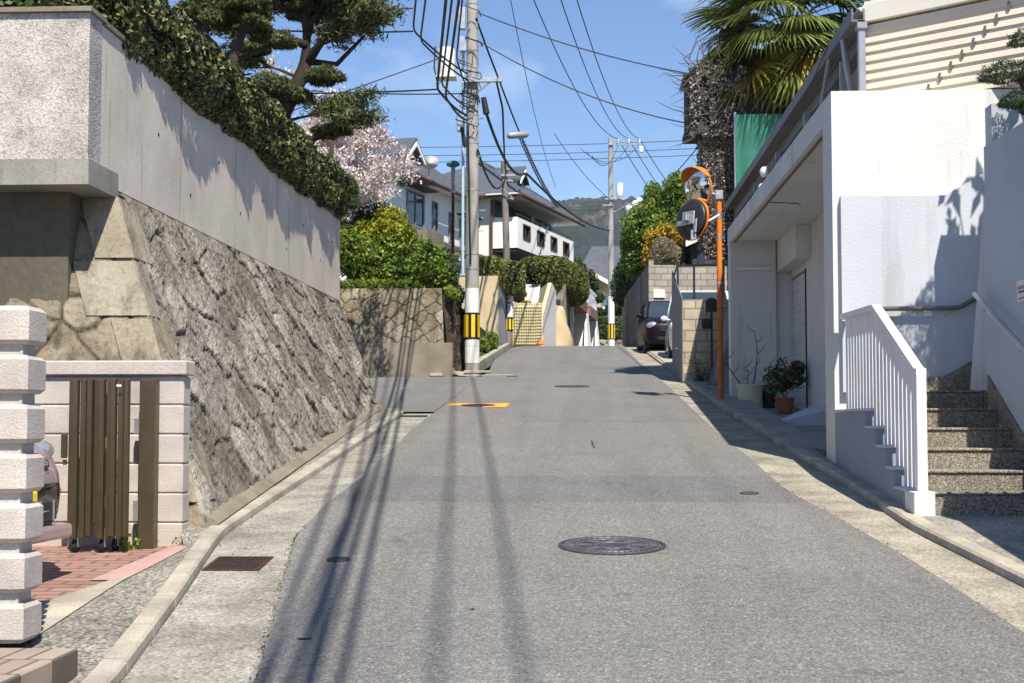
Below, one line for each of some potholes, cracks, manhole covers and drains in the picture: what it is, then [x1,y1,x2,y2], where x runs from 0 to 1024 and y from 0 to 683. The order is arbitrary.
drain grate [201,556,274,571]
manhole cover [558,536,666,555]
